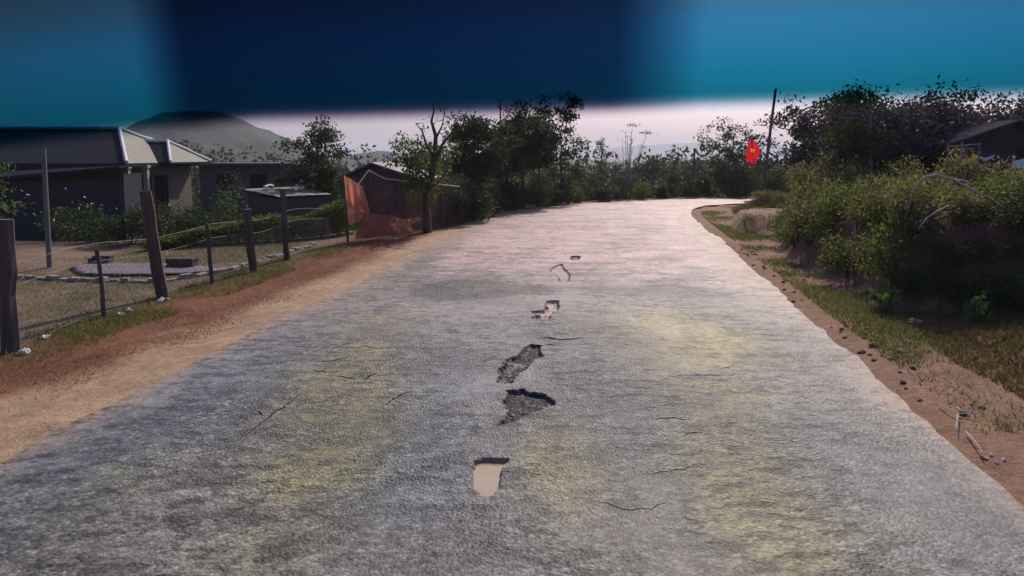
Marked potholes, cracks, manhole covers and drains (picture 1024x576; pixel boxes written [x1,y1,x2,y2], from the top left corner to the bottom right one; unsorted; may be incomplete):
crack [314,339,387,380]
pothole [470,457,510,497]
pothole [531,300,560,321]
pothole [549,264,571,282]
pothole [497,388,557,426]
pothole [496,344,544,384]
crack [239,394,299,440]
crack [537,337,583,346]
crack [590,465,695,511]
